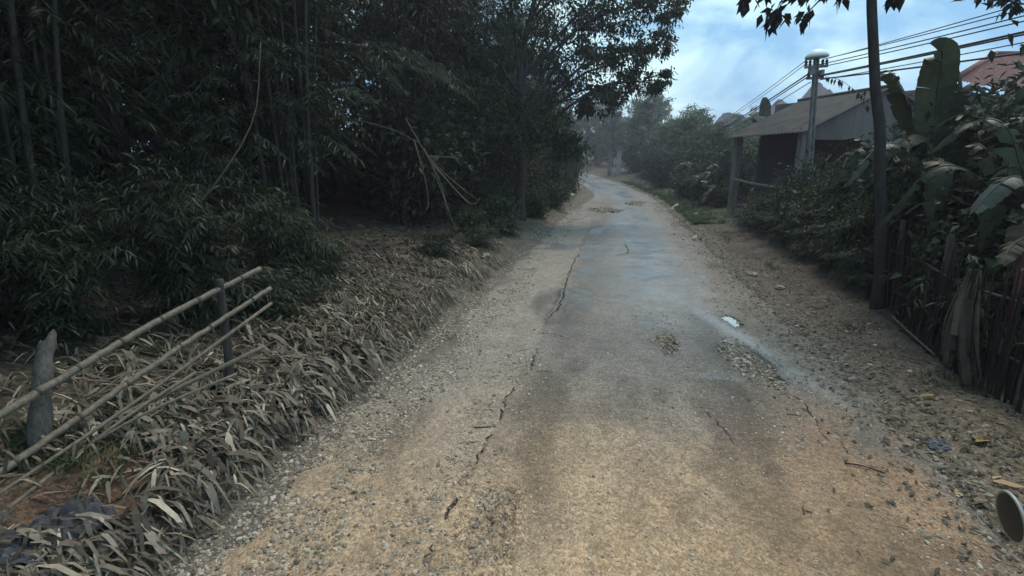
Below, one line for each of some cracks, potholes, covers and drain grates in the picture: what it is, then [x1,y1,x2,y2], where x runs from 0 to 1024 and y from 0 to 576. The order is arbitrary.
crack [616,244,631,256]
pothole [646,329,686,358]
crack [414,253,581,572]
pothole [706,335,793,399]
crack [699,411,741,446]
crack [775,390,857,456]
